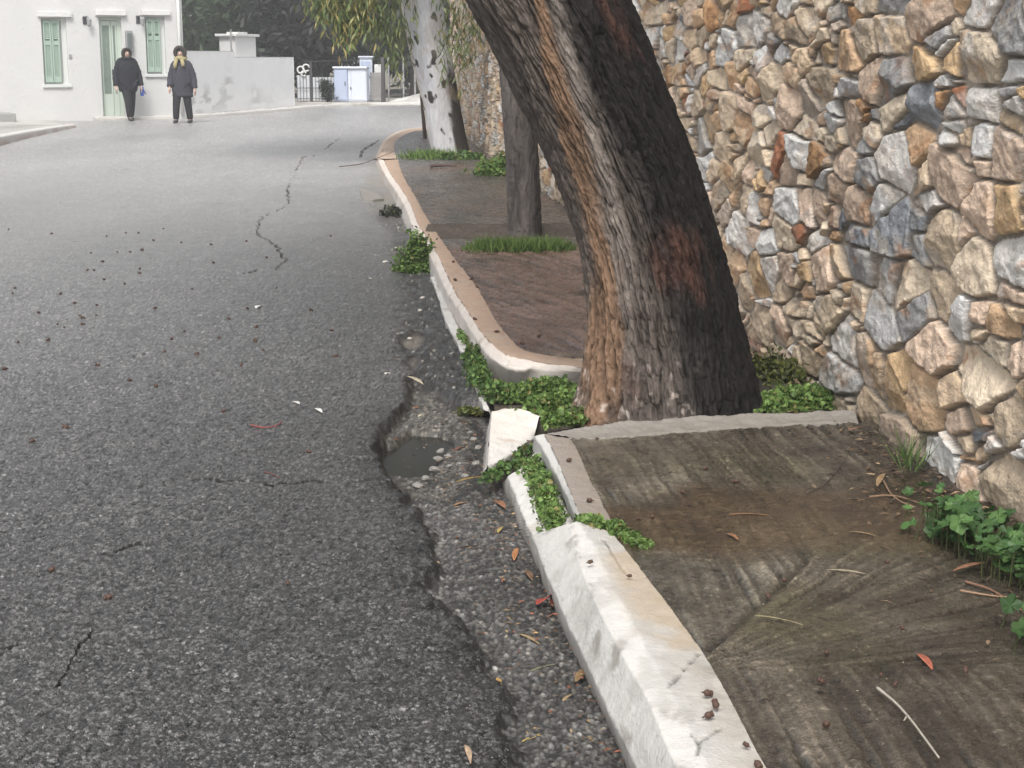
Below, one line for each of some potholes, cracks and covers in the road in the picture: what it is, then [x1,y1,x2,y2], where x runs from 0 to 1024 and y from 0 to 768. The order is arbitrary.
crack [101,541,145,556]
crack [359,140,380,158]
pothole [397,329,431,352]
crack [243,138,340,274]
pothole [373,373,485,503]
crack [40,625,94,688]
crack [188,477,328,488]
